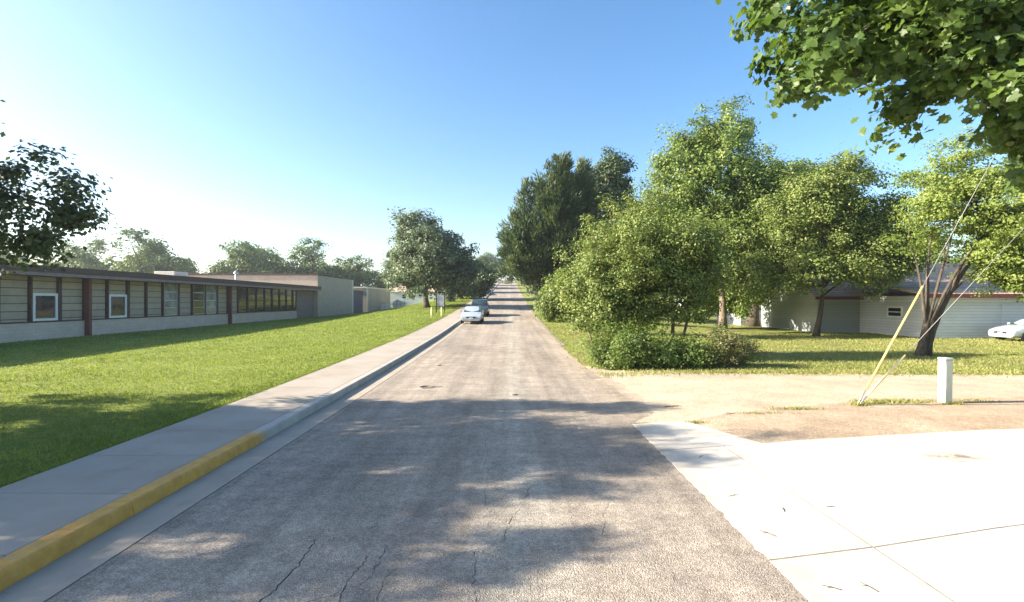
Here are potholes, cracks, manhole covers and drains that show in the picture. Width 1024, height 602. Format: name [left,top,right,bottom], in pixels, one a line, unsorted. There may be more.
crack [259,539,396,602]
